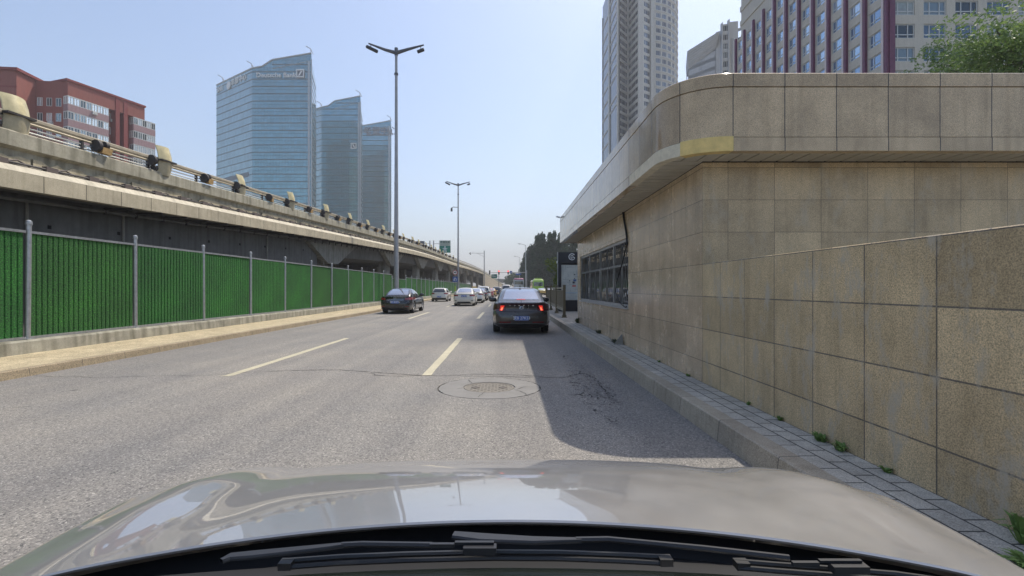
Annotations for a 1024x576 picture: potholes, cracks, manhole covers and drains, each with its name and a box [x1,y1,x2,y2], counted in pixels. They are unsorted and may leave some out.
crack [33,355,619,425]
manhole cover [438,378,540,399]
